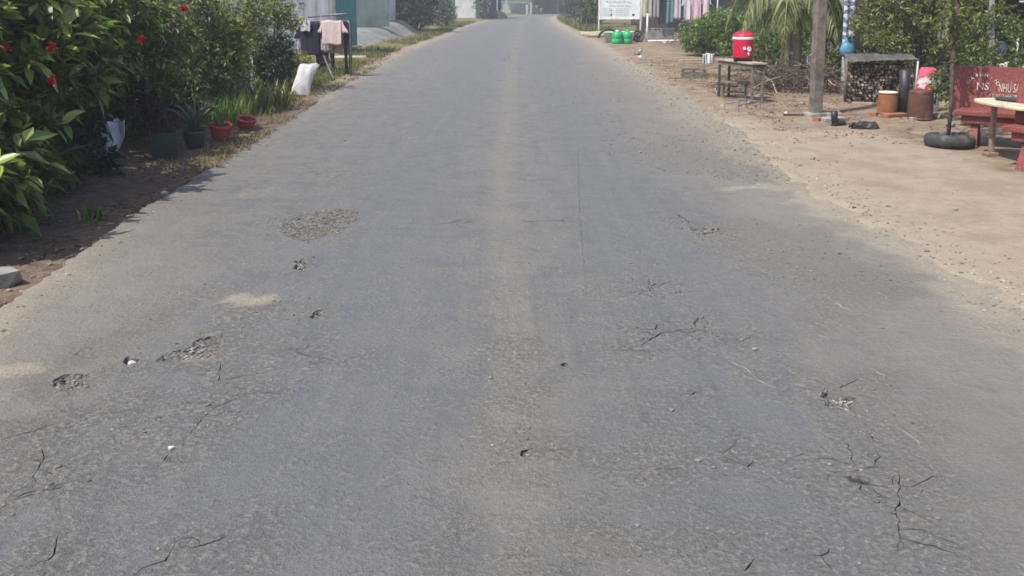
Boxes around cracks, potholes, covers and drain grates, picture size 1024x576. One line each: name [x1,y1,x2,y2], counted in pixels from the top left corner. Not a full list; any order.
pothole [154,336,225,362]
pothole [293,258,307,272]
pothole [825,396,857,410]
crack [716,423,950,552]
pothole [50,373,90,391]
crack [626,317,751,352]
crack [6,450,64,503]
crack [136,537,224,574]
crack [184,364,274,446]
